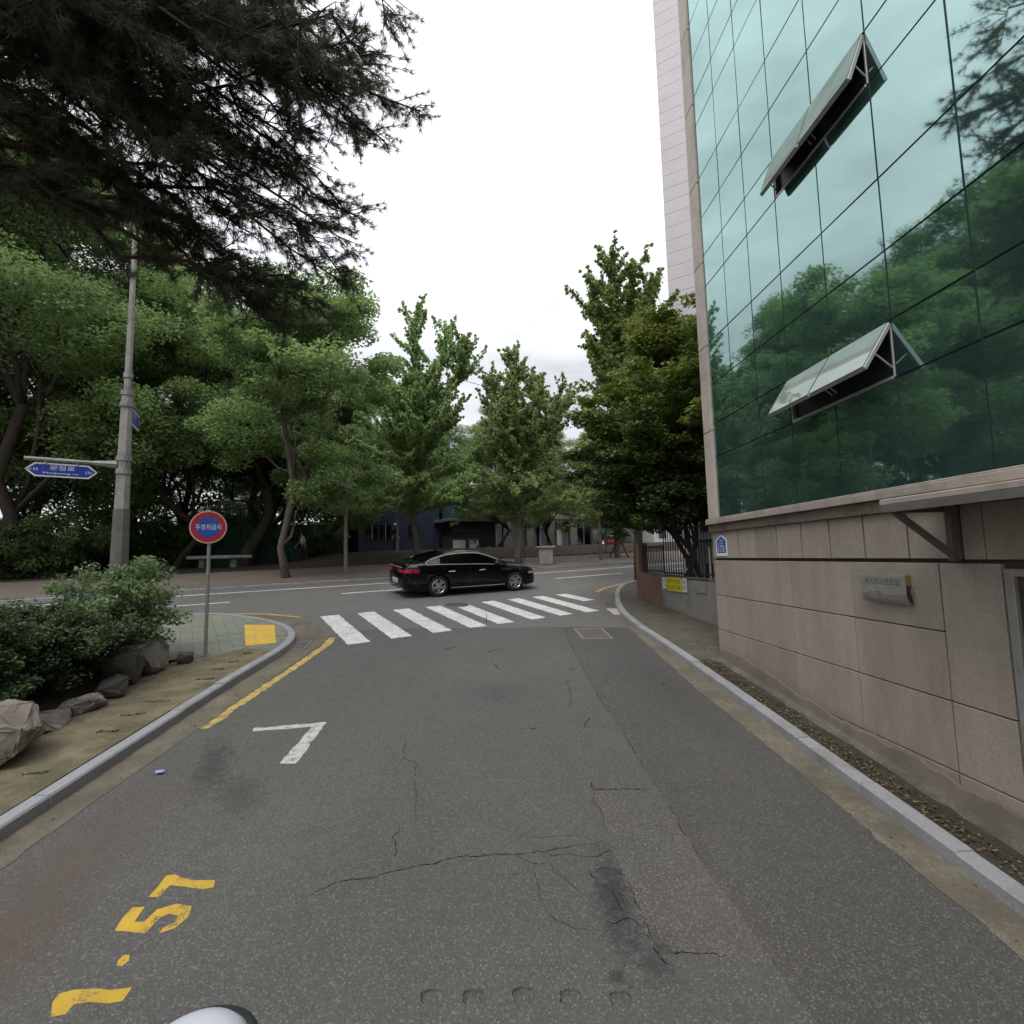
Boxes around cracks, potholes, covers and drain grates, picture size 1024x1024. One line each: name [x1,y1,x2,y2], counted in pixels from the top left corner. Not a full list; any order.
crack [294,733,605,930]
pothole [609,991,632,1007]
crack [550,849,729,964]
pothole [512,986,534,1003]
drain grate [289,641,313,649]
manhole cover [573,628,614,639]
pothole [463,989,485,1005]
pothole [421,988,444,1004]
pothole [560,989,582,1005]
